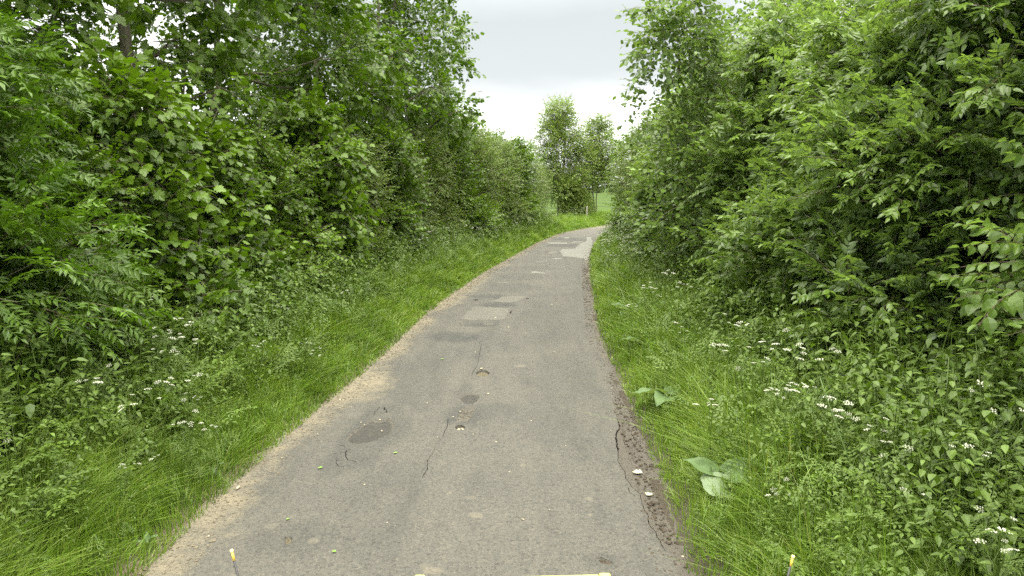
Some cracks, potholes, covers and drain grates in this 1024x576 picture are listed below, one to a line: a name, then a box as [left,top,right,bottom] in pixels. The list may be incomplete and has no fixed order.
crack [615,421,665,550]
